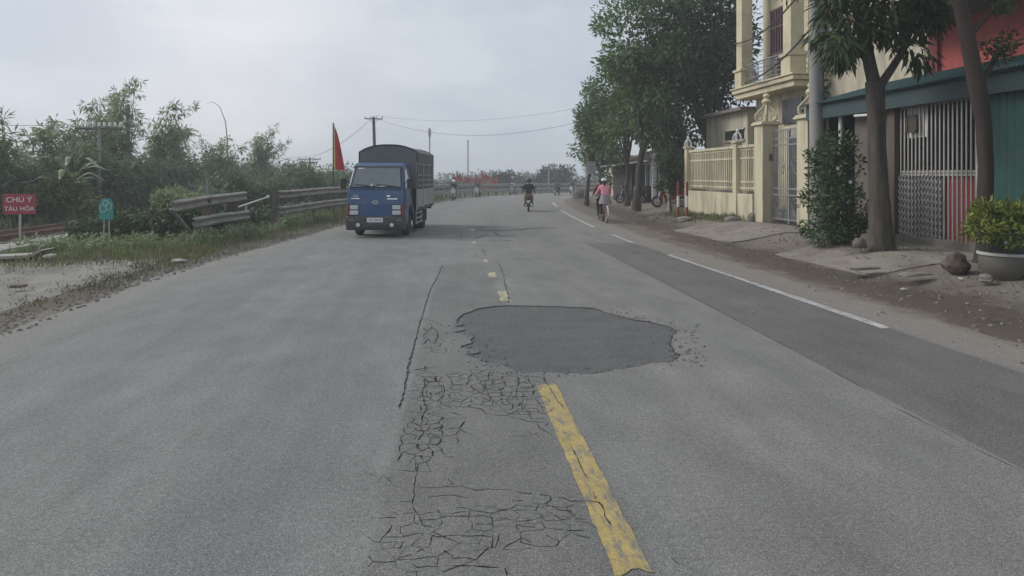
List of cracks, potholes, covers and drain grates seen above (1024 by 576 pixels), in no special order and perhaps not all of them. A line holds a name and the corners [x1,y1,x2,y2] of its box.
crack [367,446,620,576]
crack [396,266,562,472]
